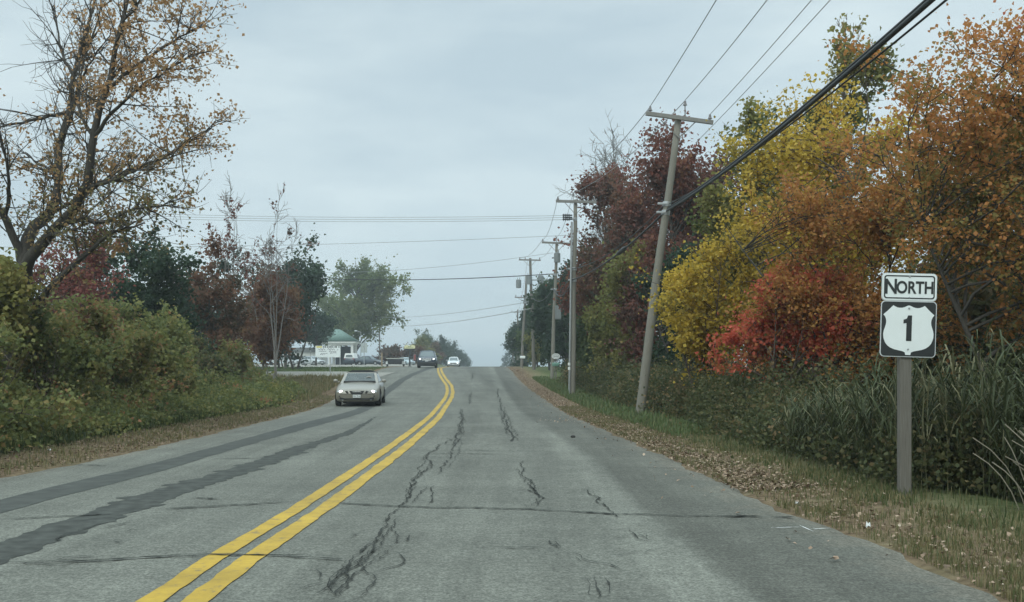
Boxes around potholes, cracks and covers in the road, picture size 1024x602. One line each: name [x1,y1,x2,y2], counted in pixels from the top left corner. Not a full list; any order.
crack [4,375,793,601]
